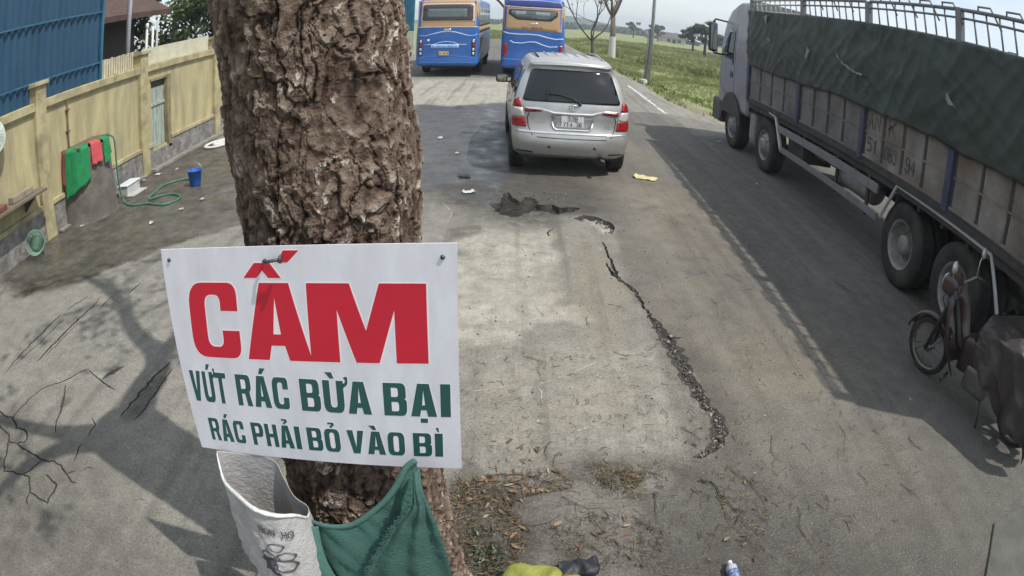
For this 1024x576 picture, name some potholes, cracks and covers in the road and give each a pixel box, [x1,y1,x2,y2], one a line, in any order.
crack [0,283,173,505]
crack [602,242,729,459]
pothole [574,215,615,234]
pothole [491,192,582,217]
